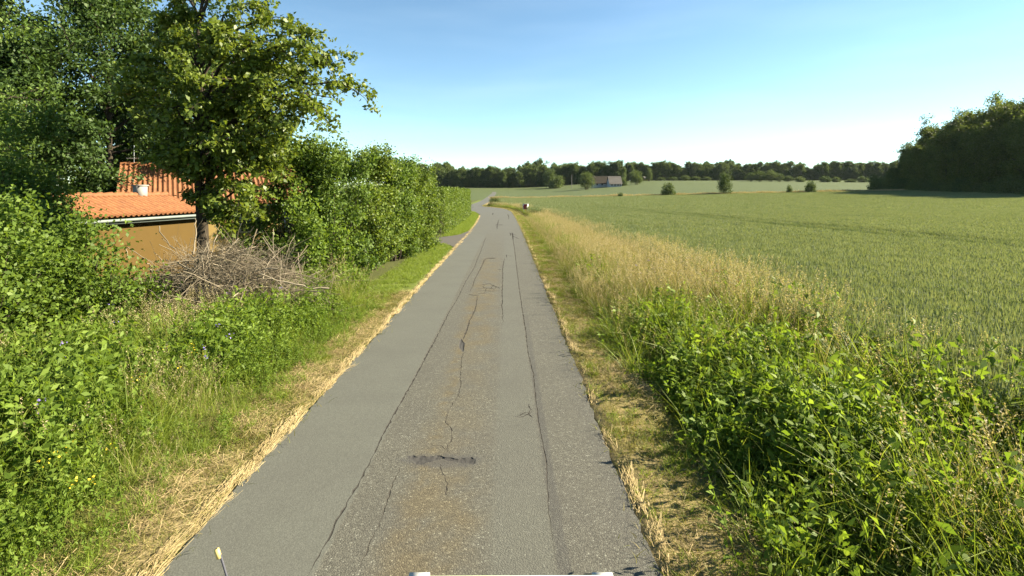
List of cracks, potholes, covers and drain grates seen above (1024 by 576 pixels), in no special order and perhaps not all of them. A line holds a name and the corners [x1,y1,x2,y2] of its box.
crack [359,466,401,570]
crack [434,216,554,545]
